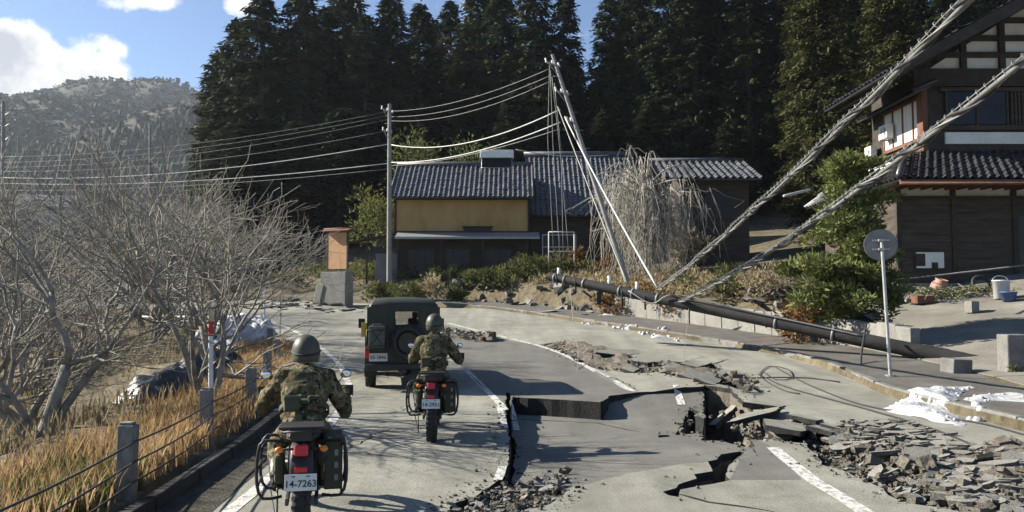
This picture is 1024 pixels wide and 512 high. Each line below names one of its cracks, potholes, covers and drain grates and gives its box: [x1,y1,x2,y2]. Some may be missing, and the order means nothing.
pothole [701,370,786,449]
crack [505,392,638,482]
crack [541,340,754,391]
pothole [804,418,1024,512]
pothole [676,407,726,436]
